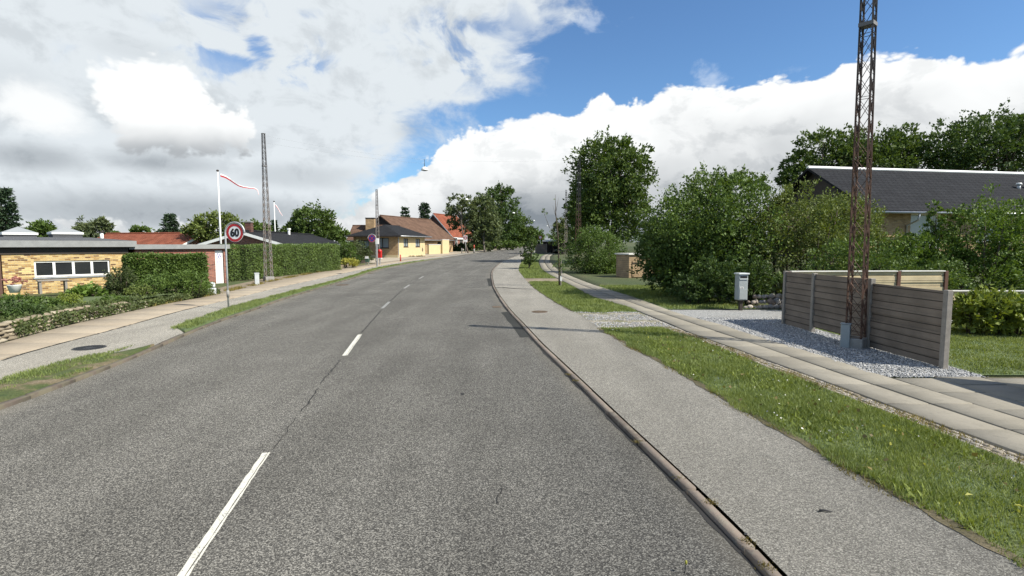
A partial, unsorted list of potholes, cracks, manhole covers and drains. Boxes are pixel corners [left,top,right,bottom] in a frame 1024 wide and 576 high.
crack [273,360,340,449]
